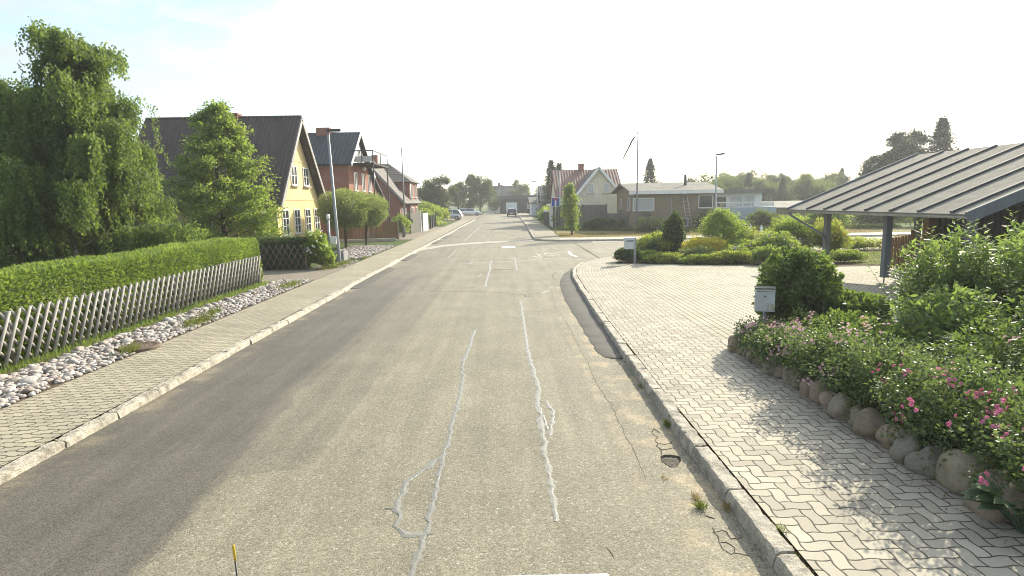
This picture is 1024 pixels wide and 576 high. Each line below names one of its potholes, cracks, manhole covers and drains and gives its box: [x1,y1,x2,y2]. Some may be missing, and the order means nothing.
crack [705,515,750,556]
pothole [651,451,691,473]
